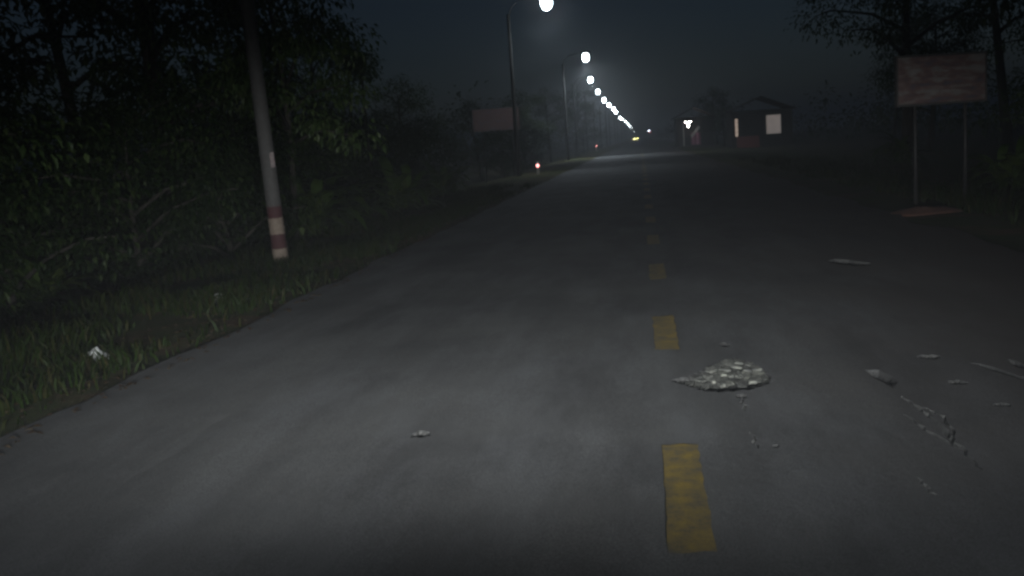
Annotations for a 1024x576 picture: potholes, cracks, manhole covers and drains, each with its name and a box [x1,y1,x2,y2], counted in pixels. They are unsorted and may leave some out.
pothole [670,357,773,392]
crack [901,396,984,497]
